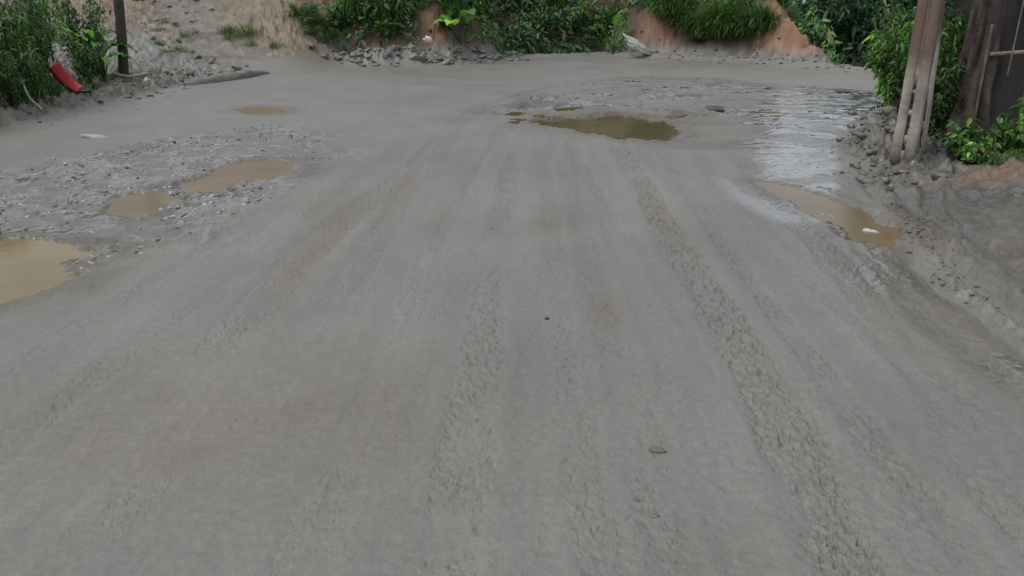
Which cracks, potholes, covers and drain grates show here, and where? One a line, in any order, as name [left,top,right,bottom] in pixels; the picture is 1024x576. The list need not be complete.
pothole [172,158,301,196]
pothole [0,234,98,305]
pothole [504,105,696,141]
